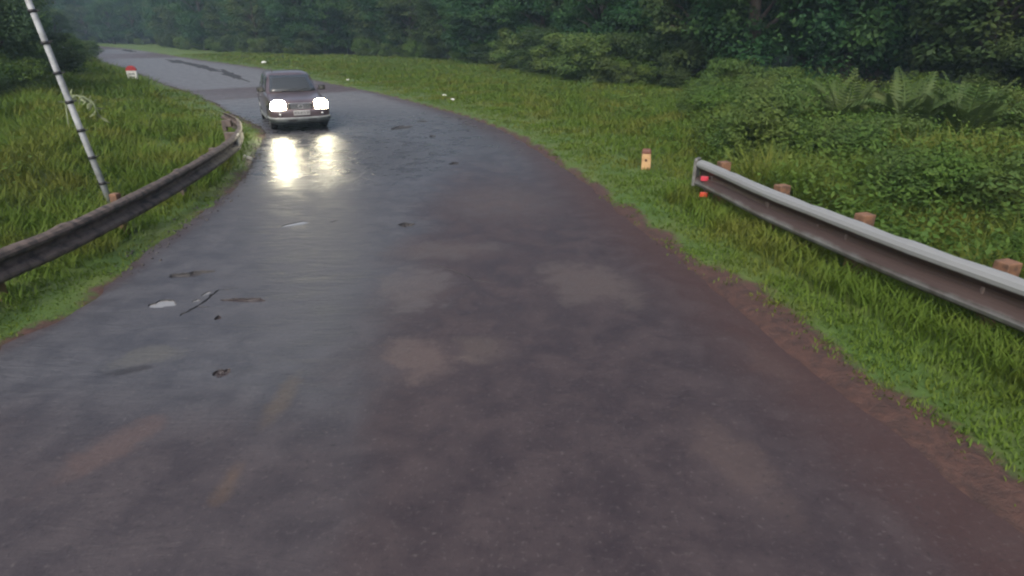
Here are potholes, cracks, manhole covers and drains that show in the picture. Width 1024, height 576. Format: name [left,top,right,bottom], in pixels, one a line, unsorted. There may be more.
pothole [169,270,216,278]
pothole [148,300,176,308]
crack [180,288,237,316]
pothole [212,368,231,378]
